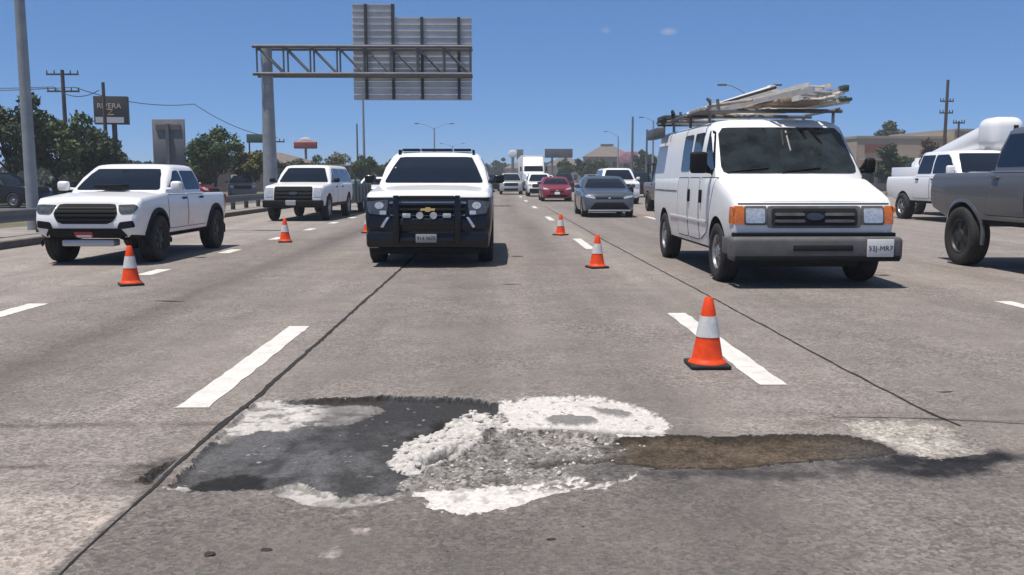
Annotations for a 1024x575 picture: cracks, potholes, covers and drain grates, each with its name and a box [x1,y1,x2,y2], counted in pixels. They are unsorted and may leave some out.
pothole [163,394,990,516]
